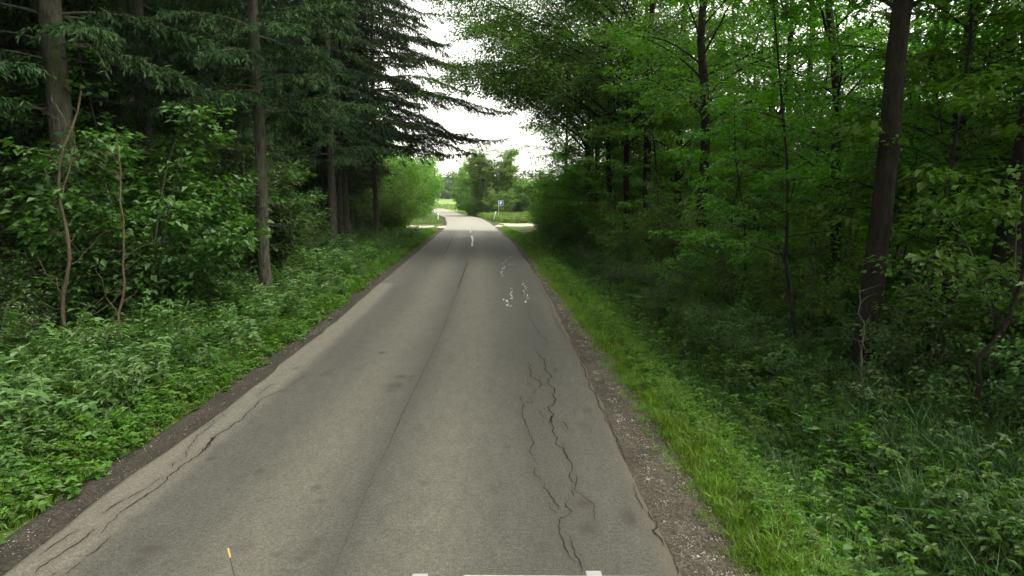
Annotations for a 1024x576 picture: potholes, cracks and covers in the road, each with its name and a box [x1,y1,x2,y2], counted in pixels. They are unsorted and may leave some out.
crack [36,377,302,574]
crack [510,238,679,574]
